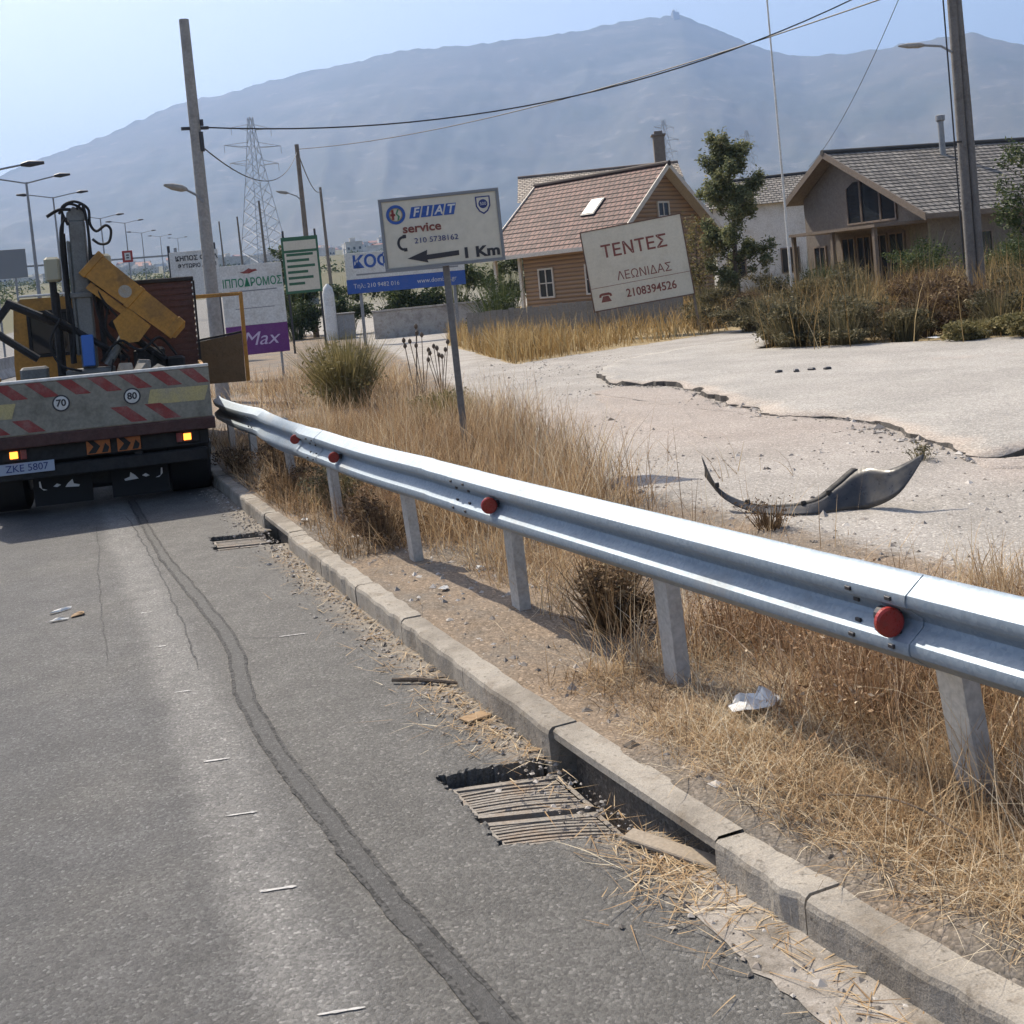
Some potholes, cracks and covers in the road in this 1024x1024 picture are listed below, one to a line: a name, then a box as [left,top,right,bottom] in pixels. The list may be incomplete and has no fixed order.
crack [96,527,108,663]
drain grate [449,721,743,849]
drain grate [214,512,304,551]
